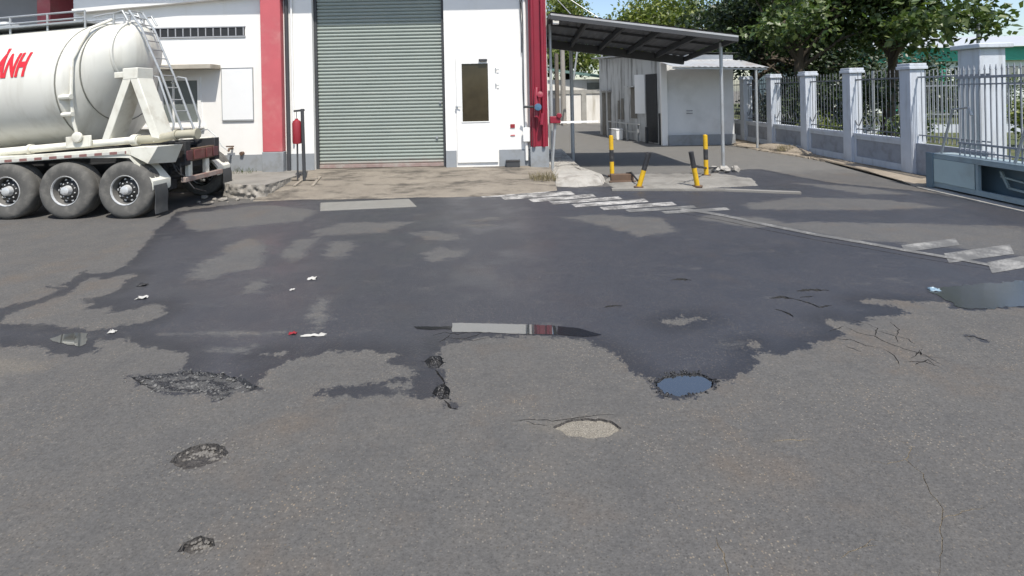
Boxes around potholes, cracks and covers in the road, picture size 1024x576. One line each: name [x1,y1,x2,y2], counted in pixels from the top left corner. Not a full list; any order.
pothole [164,530,225,559]
pothole [432,383,451,400]
pothole [157,437,240,476]
pothole [122,368,272,403]
crack [830,320,939,367]
crack [716,538,729,576]
pothole [648,369,721,397]
pothole [422,356,446,369]
crack [875,436,982,576]
